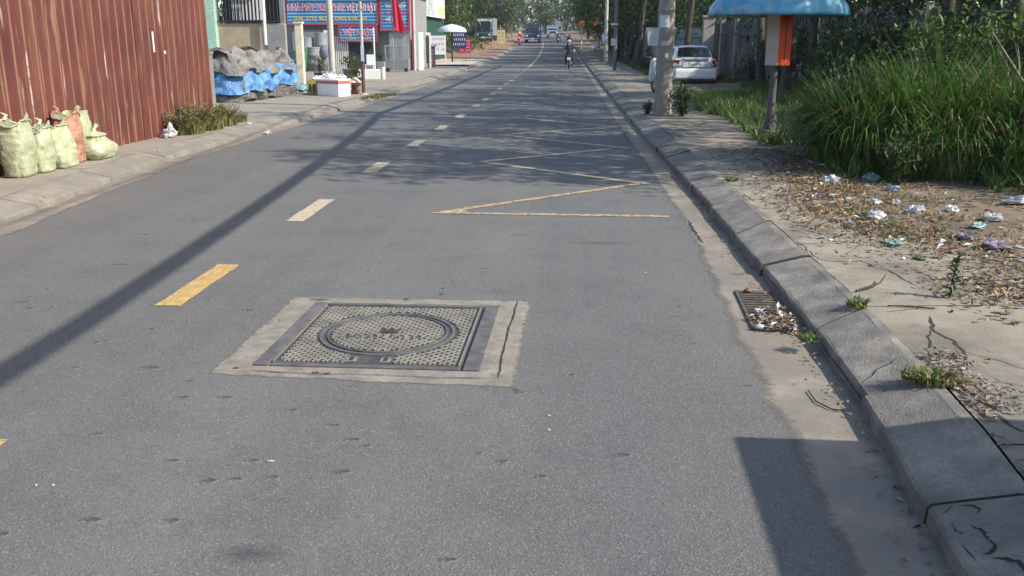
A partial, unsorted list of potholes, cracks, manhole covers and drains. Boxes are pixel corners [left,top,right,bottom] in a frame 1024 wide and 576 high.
crack [912,505,1024,571]
drain grate [734,290,797,332]
manhole cover [210,297,530,387]
crack [926,316,1024,432]
